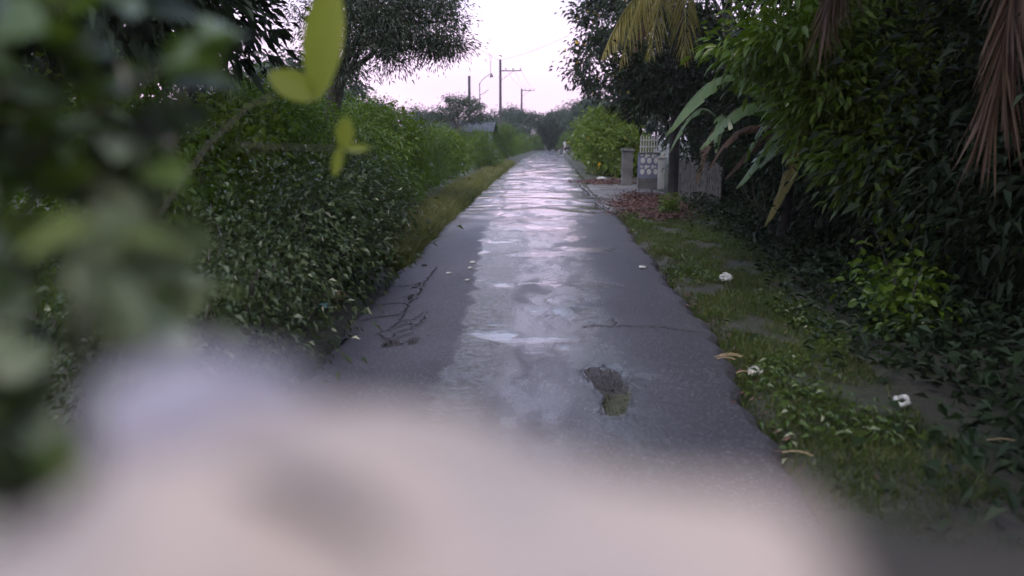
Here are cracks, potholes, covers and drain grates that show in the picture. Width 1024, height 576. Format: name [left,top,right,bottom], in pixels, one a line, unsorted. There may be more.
crack [335,266,438,341]
pothole [578,363,646,421]
crack [585,319,698,332]
